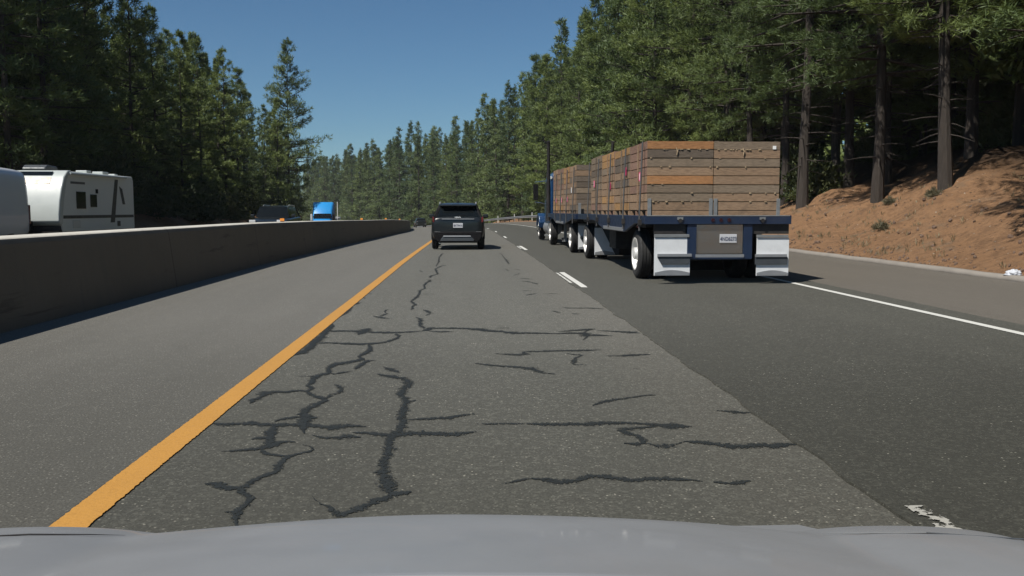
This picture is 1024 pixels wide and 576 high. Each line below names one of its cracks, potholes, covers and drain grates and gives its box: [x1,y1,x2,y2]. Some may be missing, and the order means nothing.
crack [204,253,797,526]
